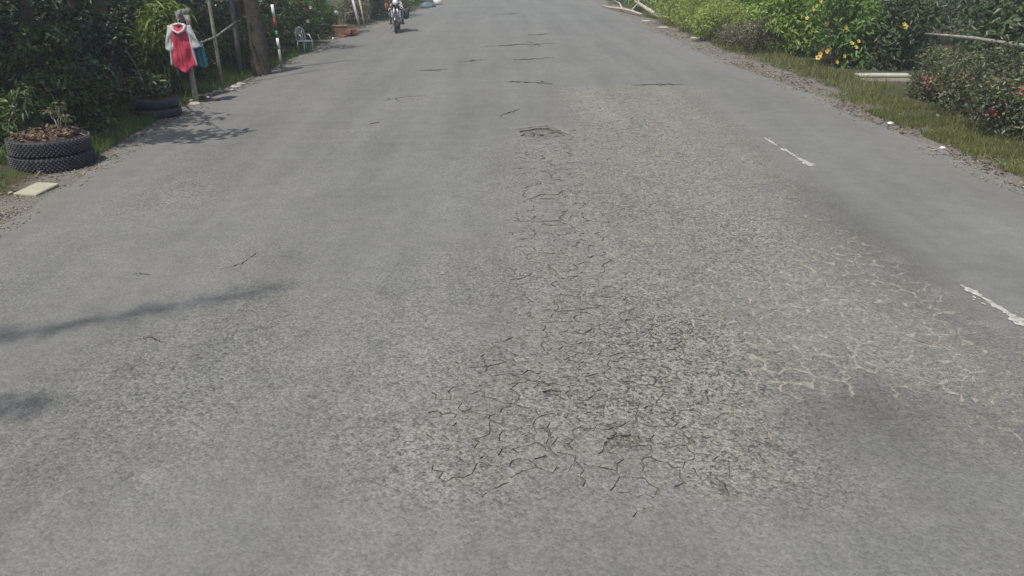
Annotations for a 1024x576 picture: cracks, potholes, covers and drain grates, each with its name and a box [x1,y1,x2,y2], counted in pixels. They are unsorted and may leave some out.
crack [422,88,1024,517]
pothole [520,128,566,140]
